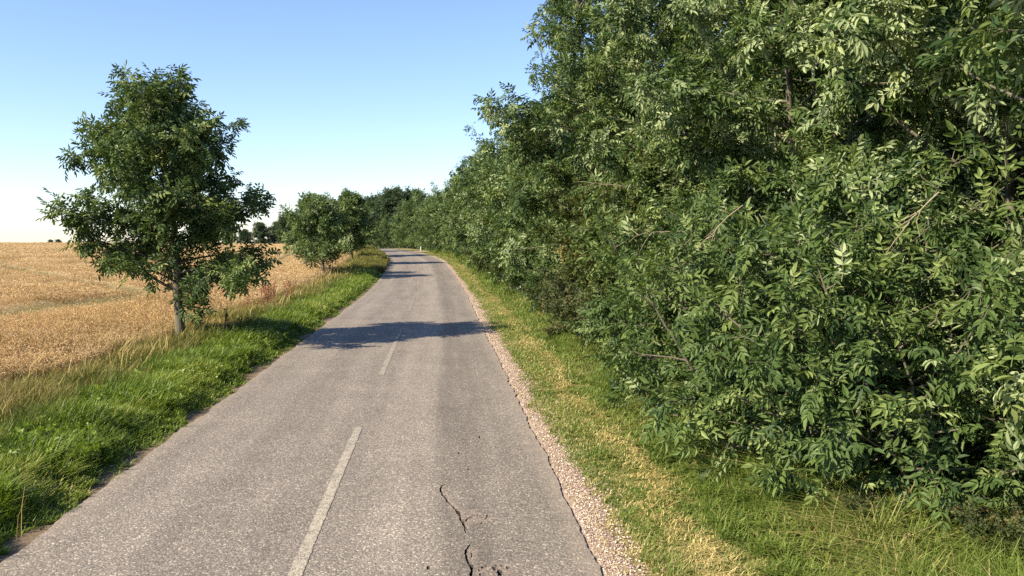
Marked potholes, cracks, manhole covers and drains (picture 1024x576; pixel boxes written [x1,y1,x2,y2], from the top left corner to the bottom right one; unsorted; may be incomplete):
crack [439,484,488,576]
